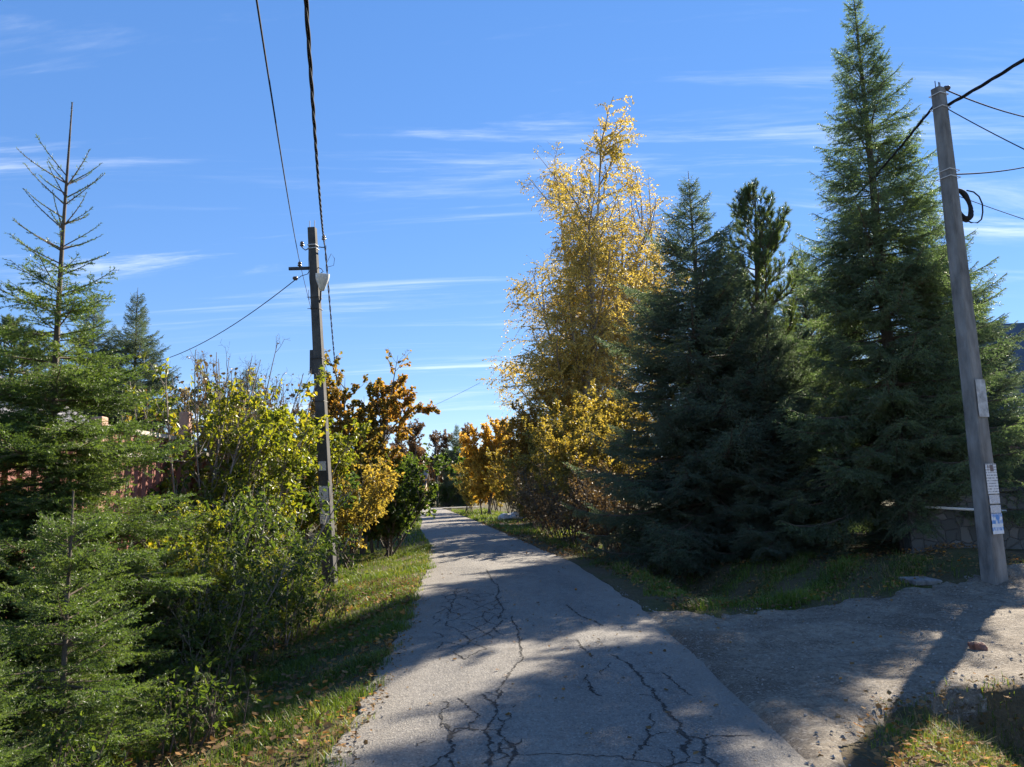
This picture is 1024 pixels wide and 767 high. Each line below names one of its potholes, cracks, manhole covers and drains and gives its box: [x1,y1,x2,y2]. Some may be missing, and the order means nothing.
crack [417,569,751,767]
